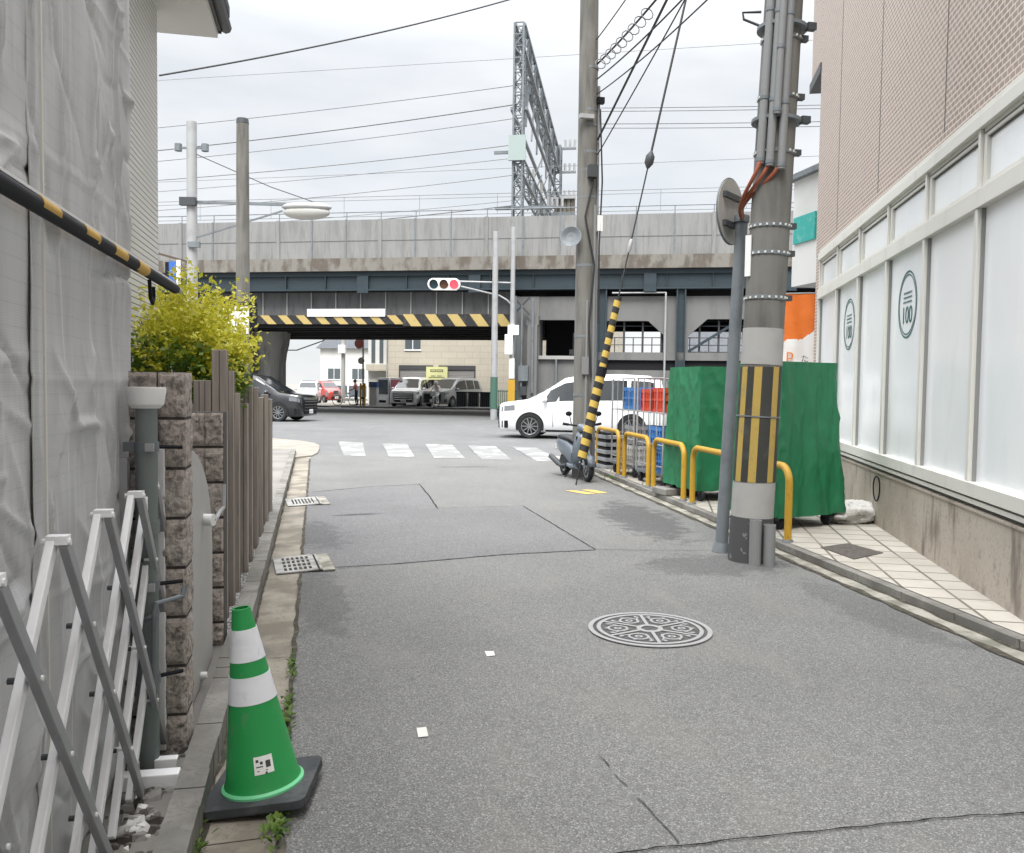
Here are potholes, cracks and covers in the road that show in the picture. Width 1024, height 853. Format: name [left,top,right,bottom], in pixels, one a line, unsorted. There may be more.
drain grate [285,496,330,507]
manhole cover [588,612,713,648]
drain grate [273,553,335,575]
crack [598,755,679,842]
utility cover [821,543,883,560]
